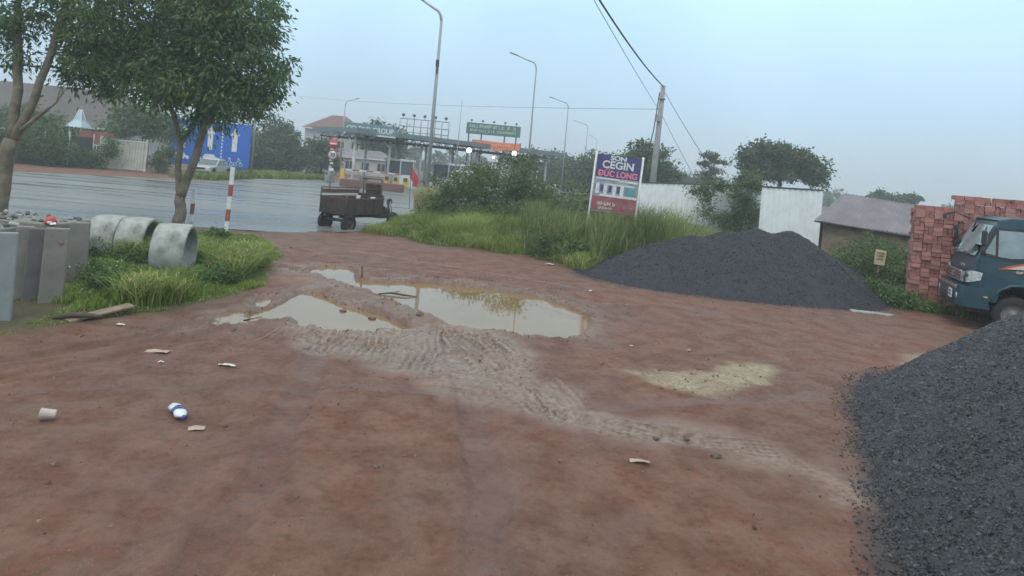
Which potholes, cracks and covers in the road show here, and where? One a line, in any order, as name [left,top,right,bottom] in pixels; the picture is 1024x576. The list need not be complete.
pothole [177,287,415,332]
pothole [305,262,597,339]
